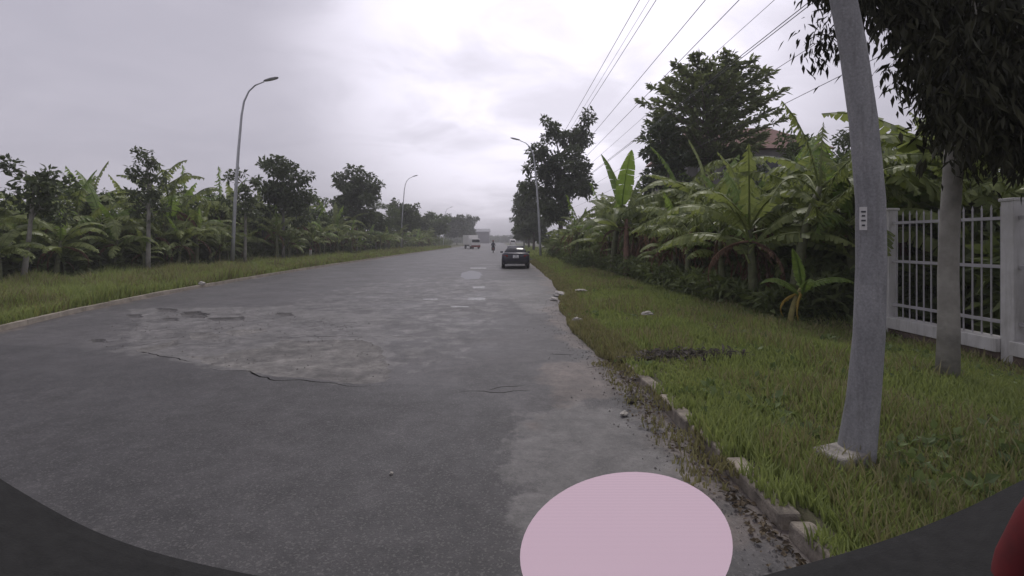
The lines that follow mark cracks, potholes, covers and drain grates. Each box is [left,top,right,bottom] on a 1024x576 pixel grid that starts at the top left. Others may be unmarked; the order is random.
crack [209,368,346,386]
